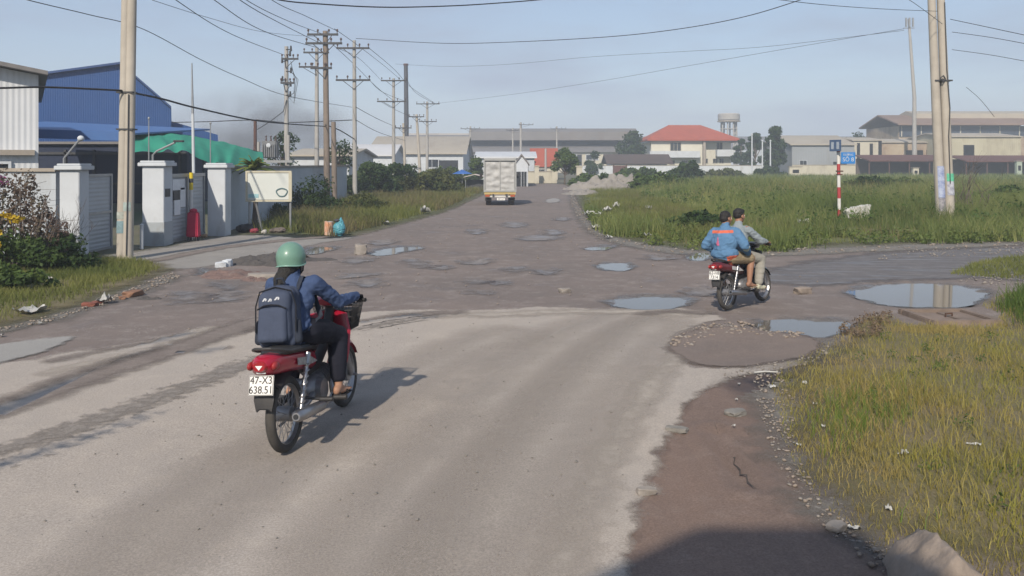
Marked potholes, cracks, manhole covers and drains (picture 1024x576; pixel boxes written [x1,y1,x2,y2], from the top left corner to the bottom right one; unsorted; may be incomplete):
manhole cover [898,308,1004,326]
pothole [753,317,862,338]
pothole [596,262,636,271]
pothole [601,293,697,310]
pothole [369,245,423,256]
pothole [305,246,341,255]
pothole [844,283,991,308]
crack [733,457,757,489]
